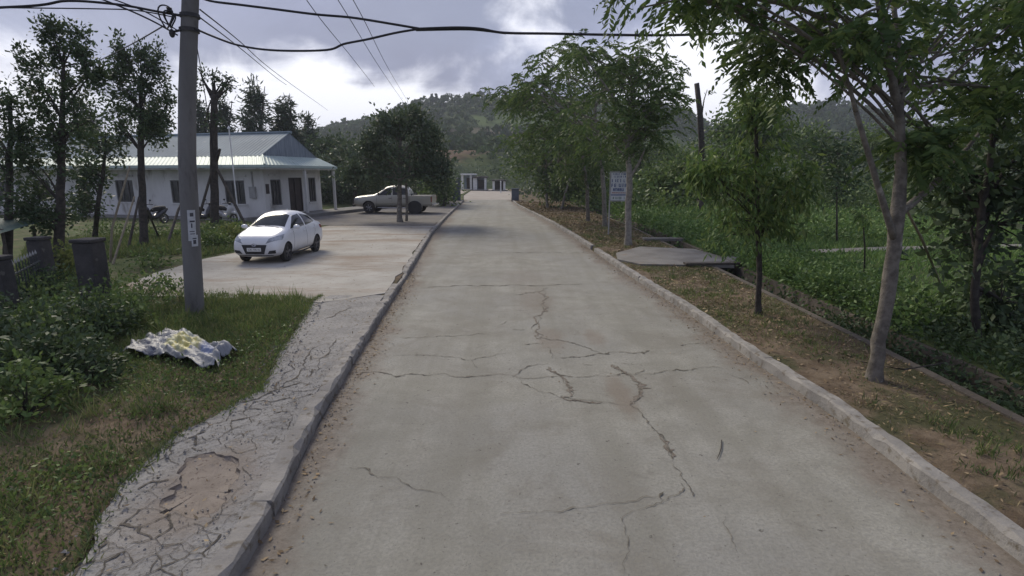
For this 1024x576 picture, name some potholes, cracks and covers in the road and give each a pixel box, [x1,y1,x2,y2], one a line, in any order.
crack [361,289,715,570]
crack [72,307,351,576]
pothole [159,451,240,519]
